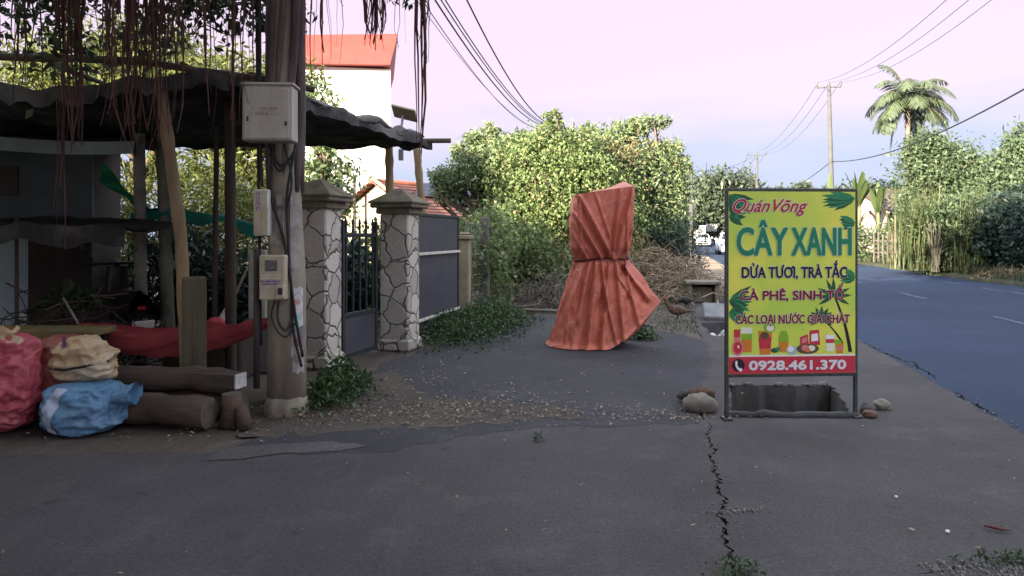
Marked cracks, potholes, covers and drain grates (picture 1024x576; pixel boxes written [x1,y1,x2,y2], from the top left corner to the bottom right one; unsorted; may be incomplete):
crack [954,391,998,415]
crack [704,423,747,576]
crack [862,342,936,380]
